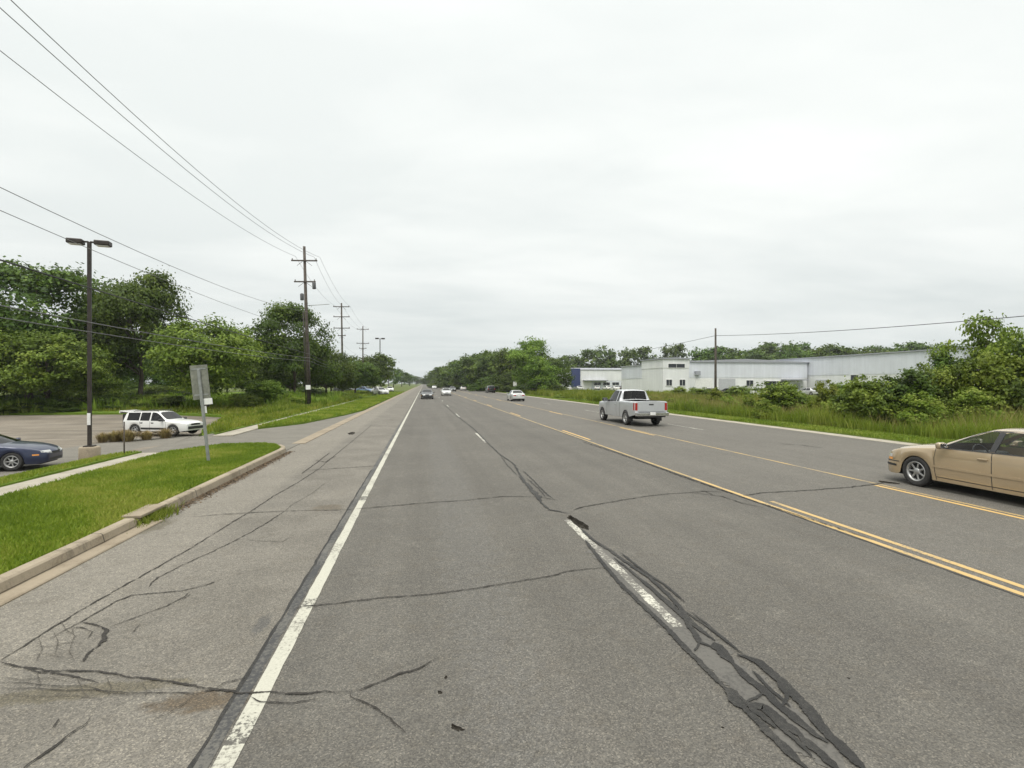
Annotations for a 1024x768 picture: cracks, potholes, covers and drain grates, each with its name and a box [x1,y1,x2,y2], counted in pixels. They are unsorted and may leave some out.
crack [24,717,91,768]
crack [574,442,885,538]
crack [1,427,556,733]
crack [297,567,602,608]
